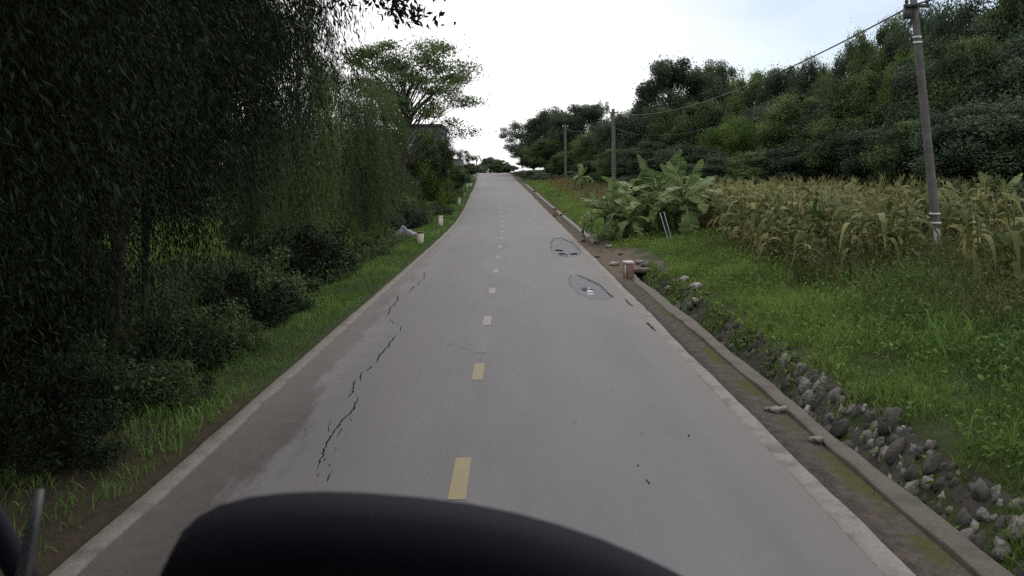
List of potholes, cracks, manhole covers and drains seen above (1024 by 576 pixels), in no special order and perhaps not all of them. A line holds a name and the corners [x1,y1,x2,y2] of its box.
pothole [550,239,581,258]
pothole [568,274,614,301]
crack [316,272,425,482]
